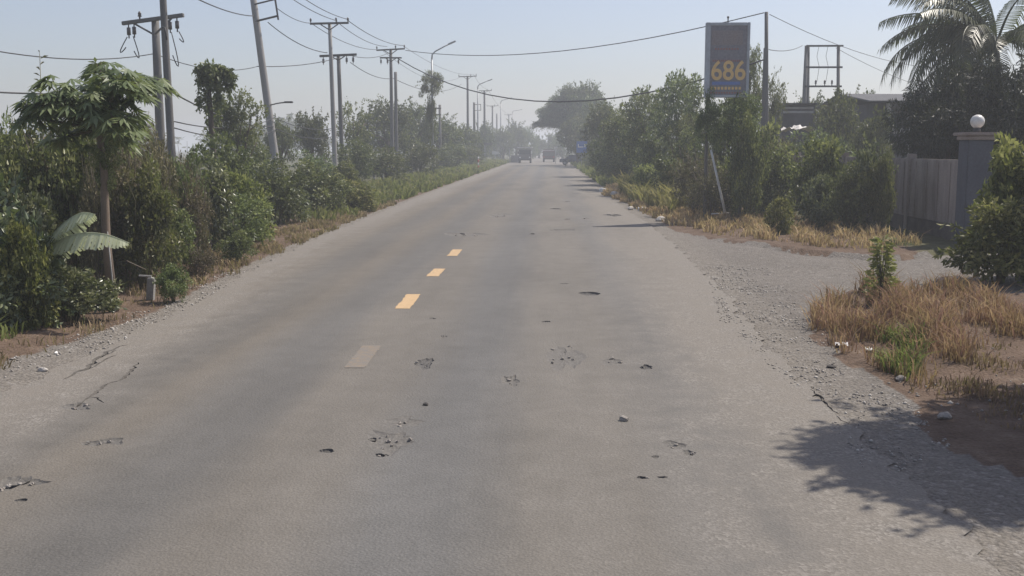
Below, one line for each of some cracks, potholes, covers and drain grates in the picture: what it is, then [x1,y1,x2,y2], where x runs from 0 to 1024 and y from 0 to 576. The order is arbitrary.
pothole [81,438,123,446]
pothole [546,345,587,371]
pothole [601,357,623,366]
crack [63,345,138,407]
pothole [414,358,434,369]
crack [812,390,847,424]
pothole [366,430,414,456]
pothole [501,375,520,387]
pothole [662,440,686,449]
